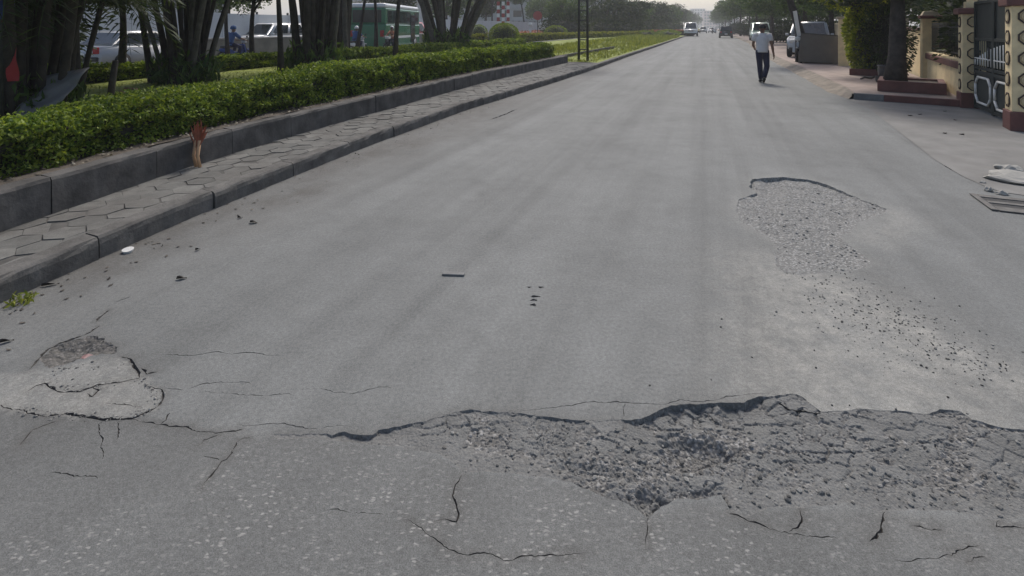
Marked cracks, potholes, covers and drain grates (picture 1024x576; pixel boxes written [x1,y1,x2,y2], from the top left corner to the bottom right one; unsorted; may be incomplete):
crack [898,546,983,562]
crack [730,512,836,538]
pothole [273,394,1024,520]
pothole [40,336,117,368]
crack [330,475,578,561]
crack [779,403,821,415]
crack [1,297,374,482]
crack [870,512,885,541]
pothole [736,177,886,276]
crack [523,393,780,414]
